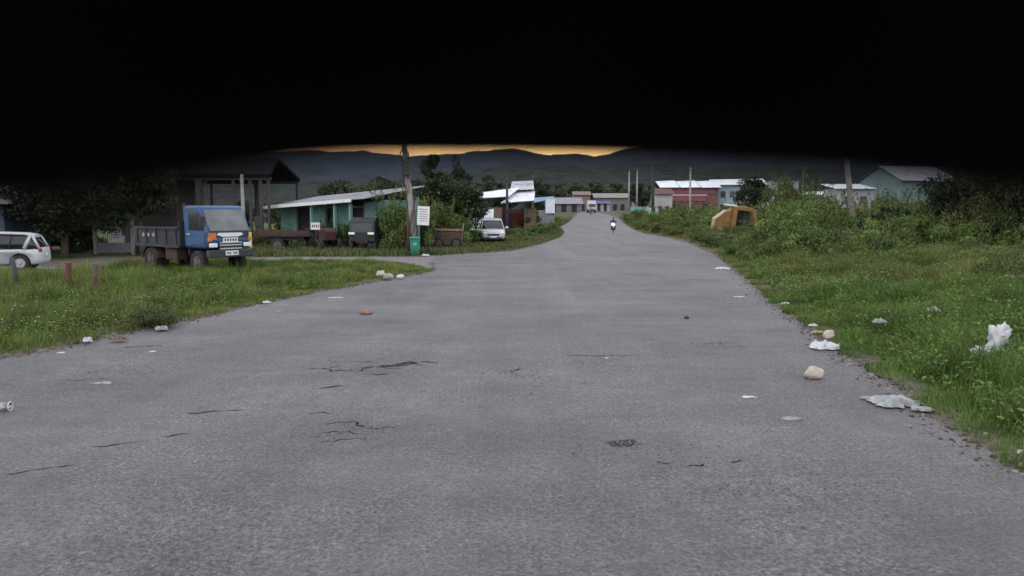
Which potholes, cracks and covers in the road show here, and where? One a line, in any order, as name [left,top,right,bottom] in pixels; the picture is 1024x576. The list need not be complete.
crack [94,433,189,447]
crack [9,464,75,475]
pothole [605,439,642,447]
crack [312,361,369,389]
crack [309,412,395,443]
